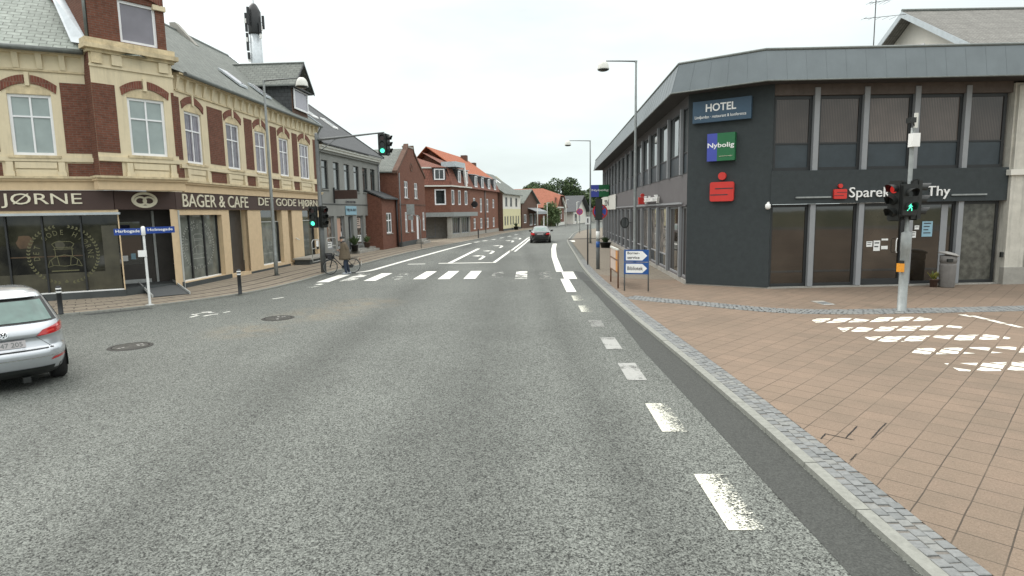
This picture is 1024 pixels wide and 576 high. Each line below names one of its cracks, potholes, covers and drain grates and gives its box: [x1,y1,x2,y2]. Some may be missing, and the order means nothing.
crack [821,423,886,460]
manhole cover [106,342,154,351]
